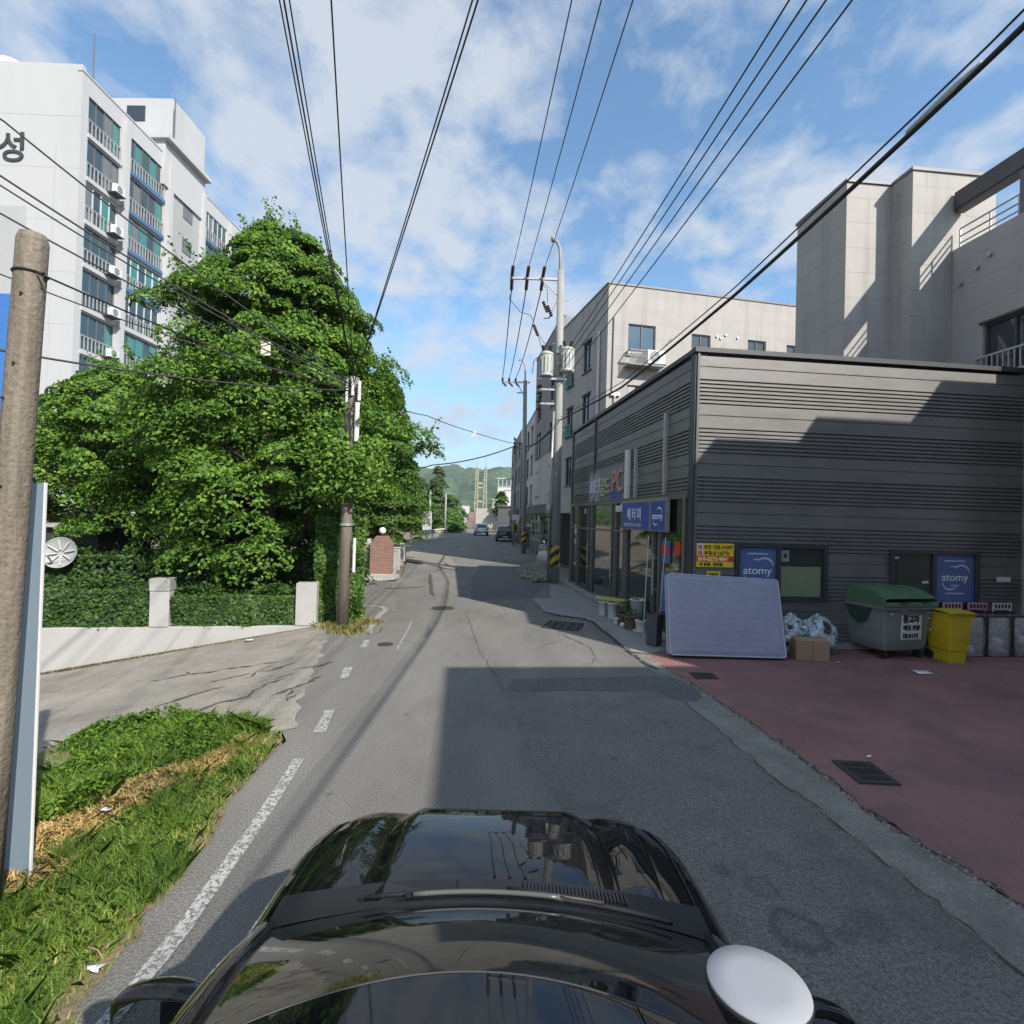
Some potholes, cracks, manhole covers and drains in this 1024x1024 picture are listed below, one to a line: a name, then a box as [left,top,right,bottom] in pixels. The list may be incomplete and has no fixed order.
crack [147,661,334,713]
drain grate [832,760,901,786]
crack [535,612,657,669]
